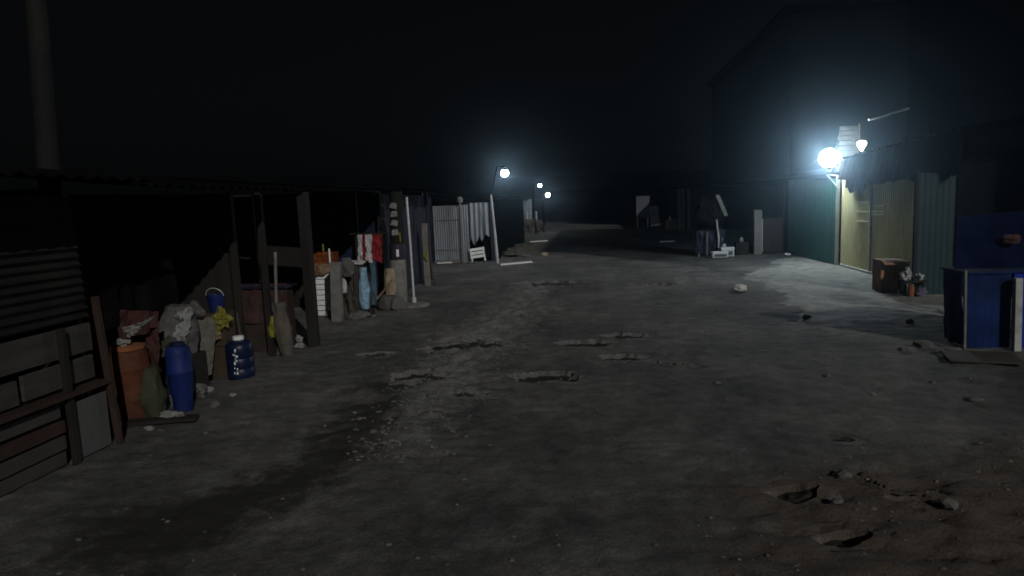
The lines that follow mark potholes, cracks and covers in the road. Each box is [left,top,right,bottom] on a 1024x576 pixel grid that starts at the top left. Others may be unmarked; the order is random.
pothole [780,520,896,553]
pothole [817,433,868,445]
pothole [378,365,470,386]
pothole [543,337,634,348]
pothole [734,478,845,506]
pothole [493,369,595,386]
pothole [404,336,524,352]
pothole [591,331,659,341]
pothole [585,351,668,363]
pothole [341,349,410,359]
